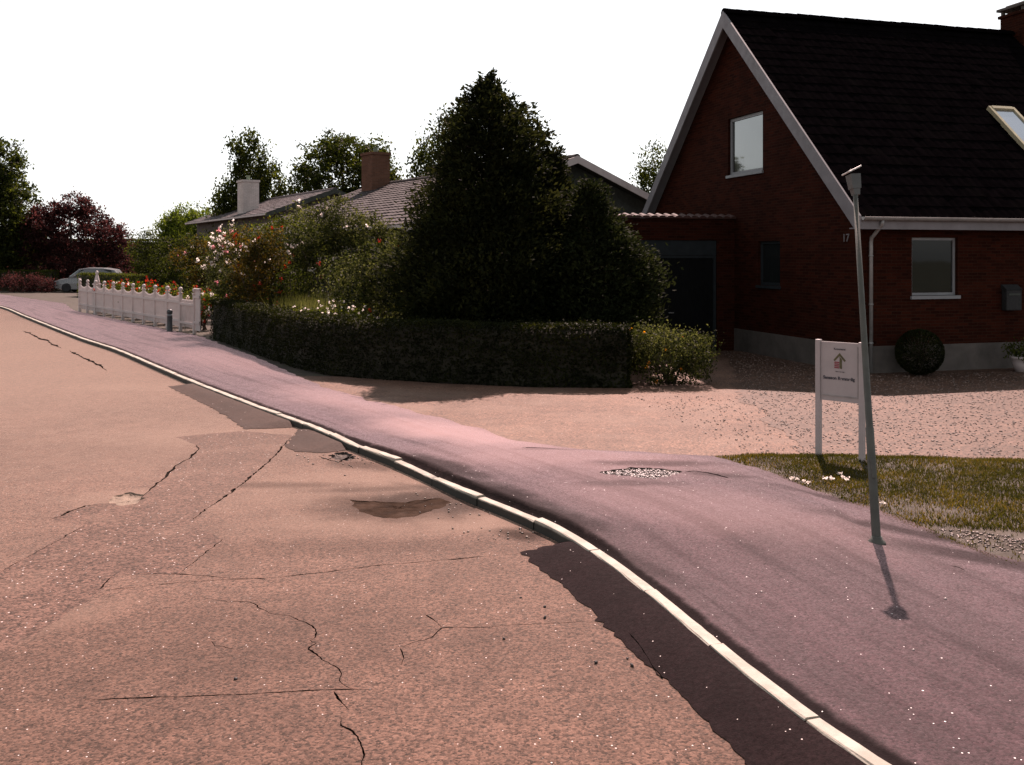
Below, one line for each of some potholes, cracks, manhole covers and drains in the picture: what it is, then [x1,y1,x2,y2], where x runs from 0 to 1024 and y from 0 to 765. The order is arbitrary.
crack [24,331,107,371]
pothole [109,492,144,506]
crack [100,554,511,590]
pothole [599,467,682,479]
crack [400,615,582,665]
crack [73,597,367,765]
pothole [328,452,357,461]
pothole [350,498,451,519]
